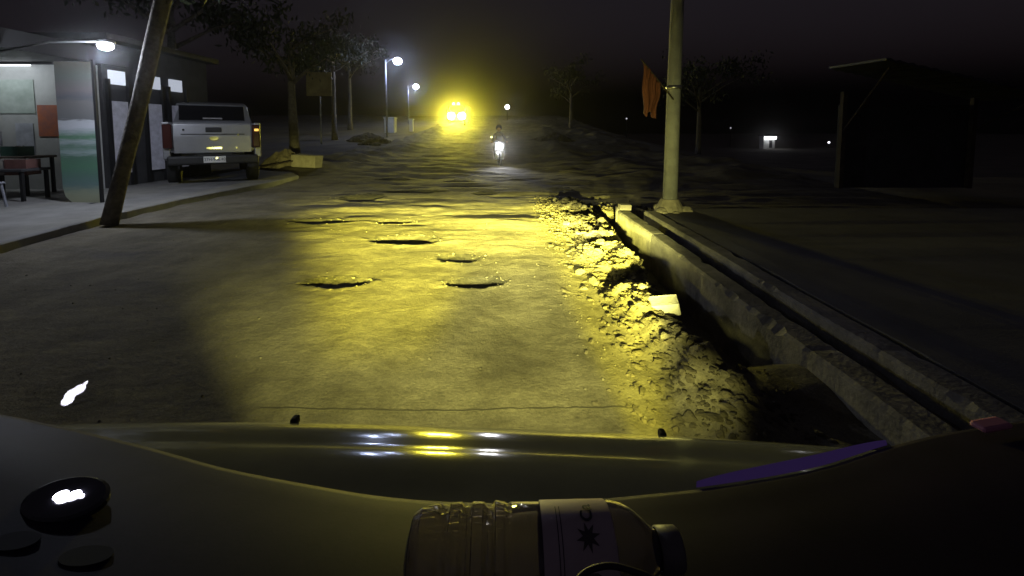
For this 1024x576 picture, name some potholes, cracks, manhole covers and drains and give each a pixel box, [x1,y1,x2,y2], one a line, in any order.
pothole [443,276,507,288]
pothole [370,235,441,245]
pothole [299,275,378,289]
pothole [436,253,483,263]
